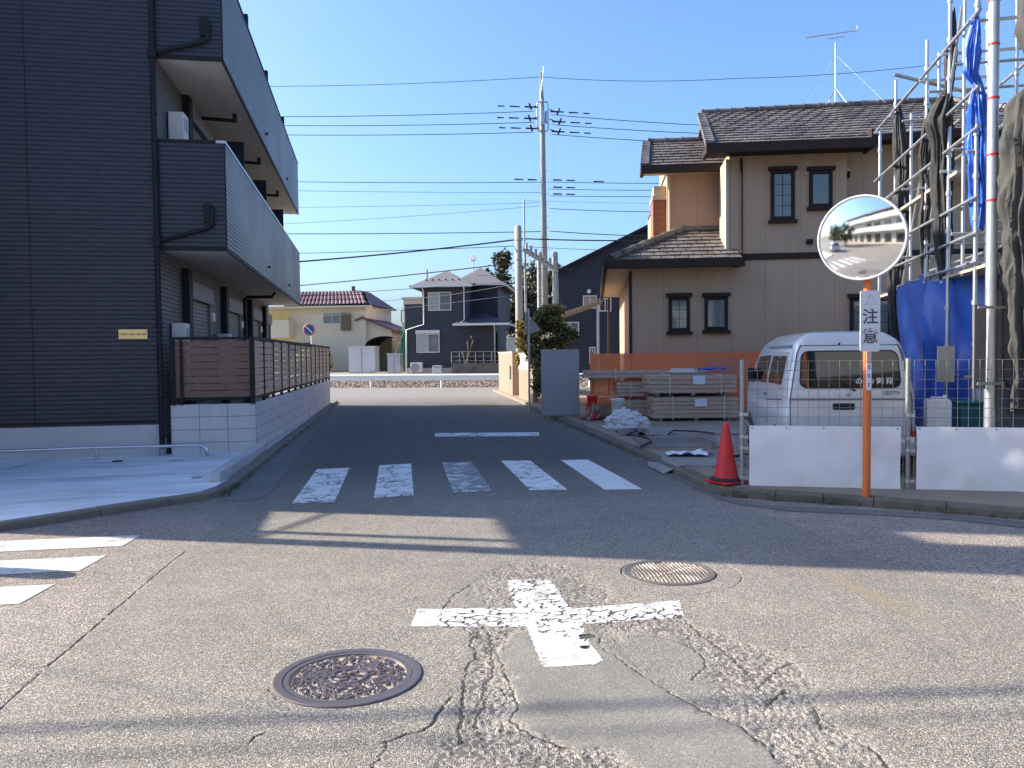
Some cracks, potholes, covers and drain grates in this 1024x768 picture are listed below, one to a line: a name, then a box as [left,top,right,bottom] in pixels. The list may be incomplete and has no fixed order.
manhole cover [272,648,422,708]
crack [372,564,888,768]
